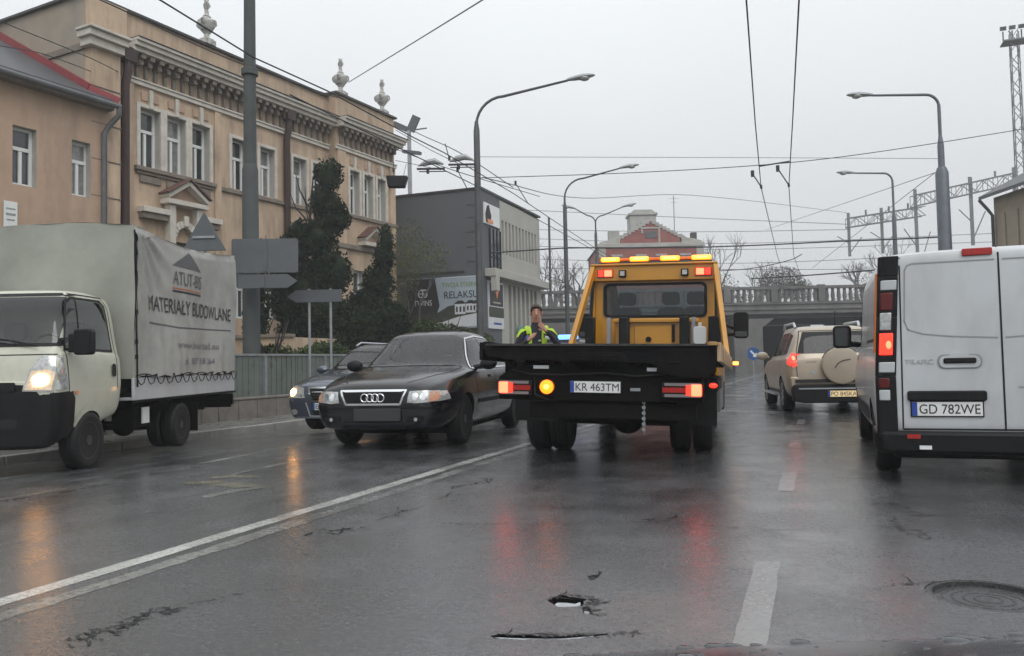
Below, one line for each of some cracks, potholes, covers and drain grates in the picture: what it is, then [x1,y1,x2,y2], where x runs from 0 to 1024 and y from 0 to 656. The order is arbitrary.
manhole cover [925,580,1024,613]
crack [873,502,936,539]
crack [64,589,266,647]
pothole [550,595,586,607]
